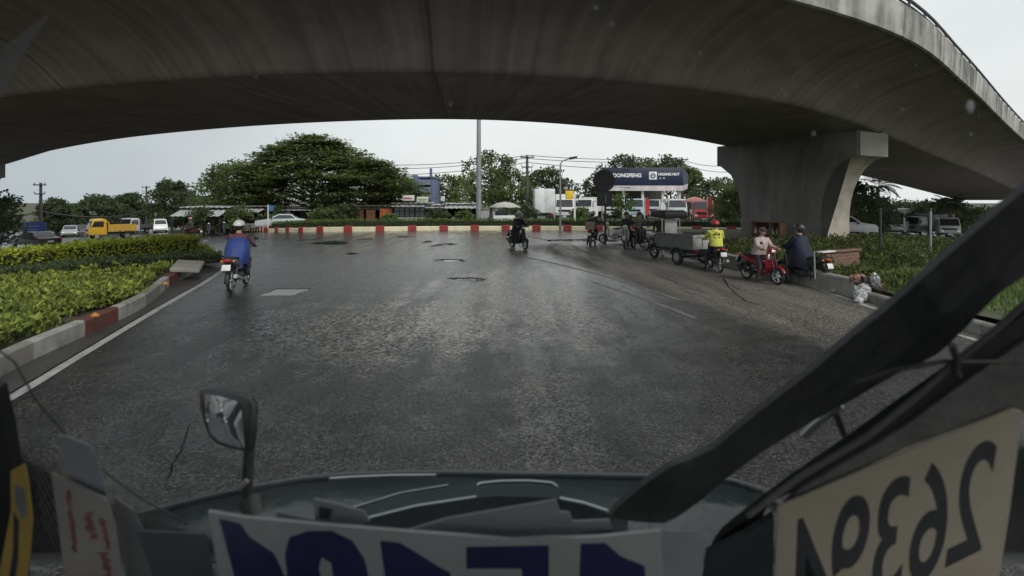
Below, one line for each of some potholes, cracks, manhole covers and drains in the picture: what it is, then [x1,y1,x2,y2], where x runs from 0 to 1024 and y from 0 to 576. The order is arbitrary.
crack [166,423,191,482]
crack [723,276,771,304]
